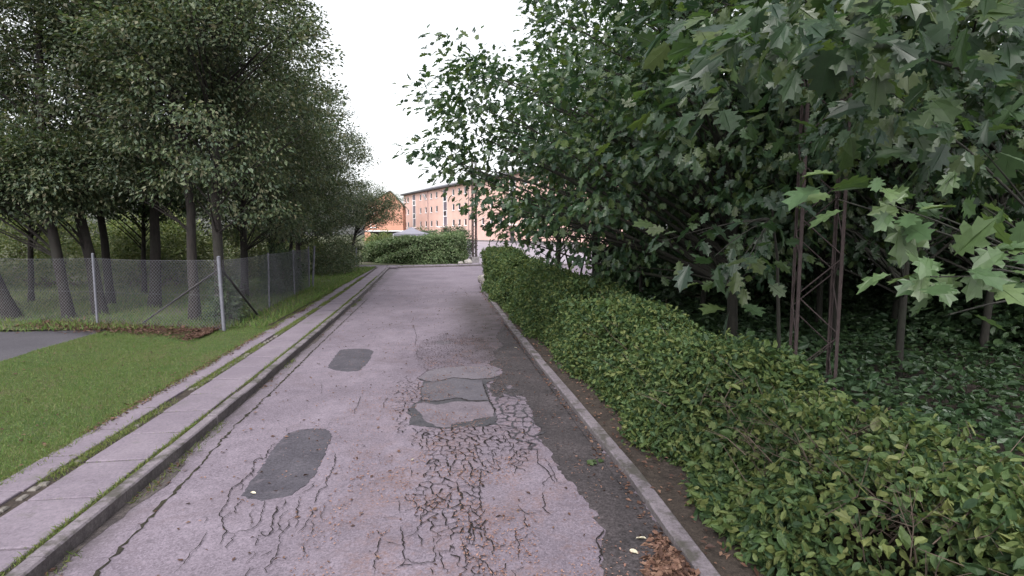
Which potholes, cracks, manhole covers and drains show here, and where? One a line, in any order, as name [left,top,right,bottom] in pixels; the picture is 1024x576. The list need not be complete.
crack [373,333,570,576]
crack [206,428,337,576]
